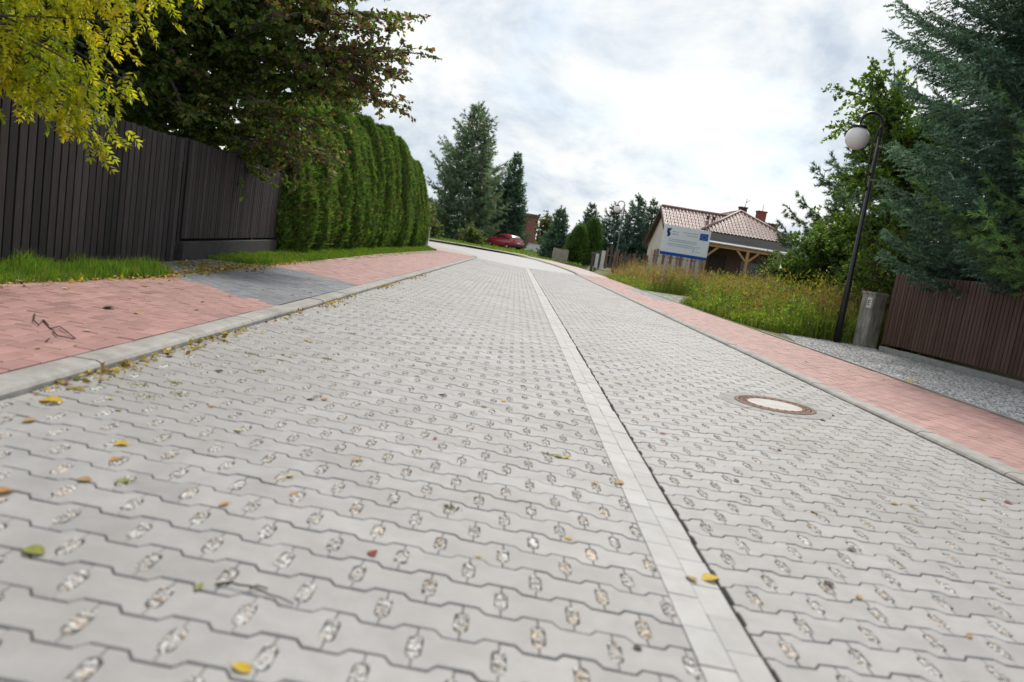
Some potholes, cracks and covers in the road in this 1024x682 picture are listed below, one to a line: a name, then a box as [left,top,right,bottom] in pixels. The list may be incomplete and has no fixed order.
manhole cover [719,392,832,421]
